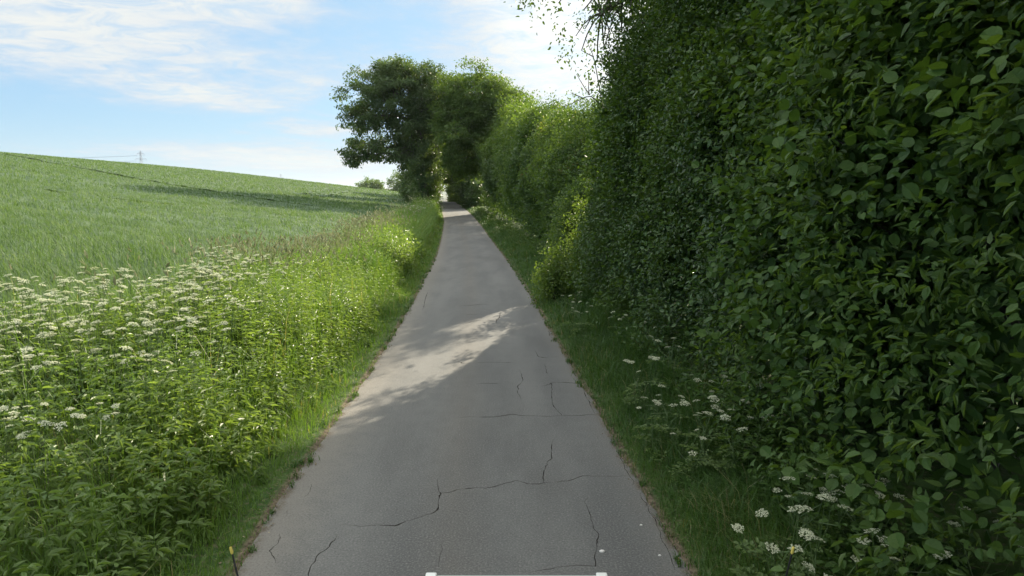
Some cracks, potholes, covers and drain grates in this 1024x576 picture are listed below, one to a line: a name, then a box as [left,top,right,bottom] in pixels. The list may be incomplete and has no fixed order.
crack [461,332,593,417]
crack [308,444,675,576]
